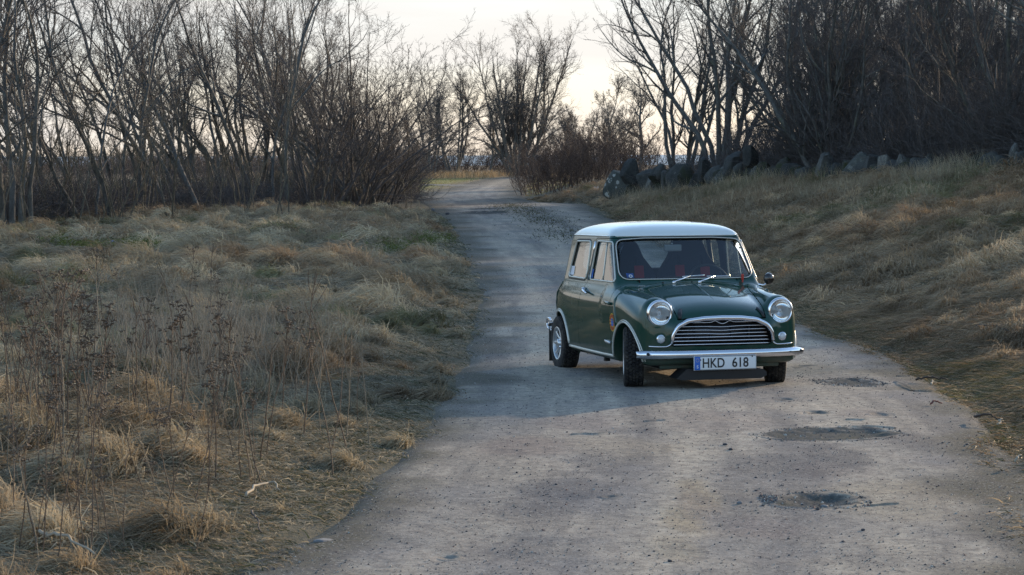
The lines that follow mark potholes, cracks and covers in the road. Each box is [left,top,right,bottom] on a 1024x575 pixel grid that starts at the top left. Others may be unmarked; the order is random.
pothole [768,491,864,509]
pothole [814,378,882,387]
pothole [755,426,905,441]
